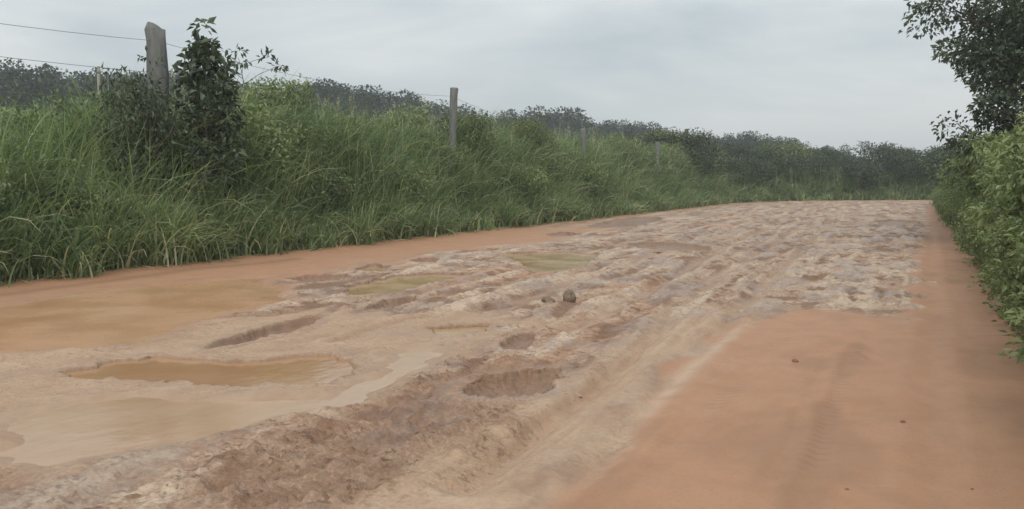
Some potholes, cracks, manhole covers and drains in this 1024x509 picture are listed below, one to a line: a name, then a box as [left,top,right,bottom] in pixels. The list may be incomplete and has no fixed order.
pothole [413,321,503,338]
pothole [446,363,582,408]
pothole [495,250,604,275]
pothole [195,314,329,353]
pothole [43,350,380,390]
pothole [327,270,469,300]
pothole [483,330,551,354]
